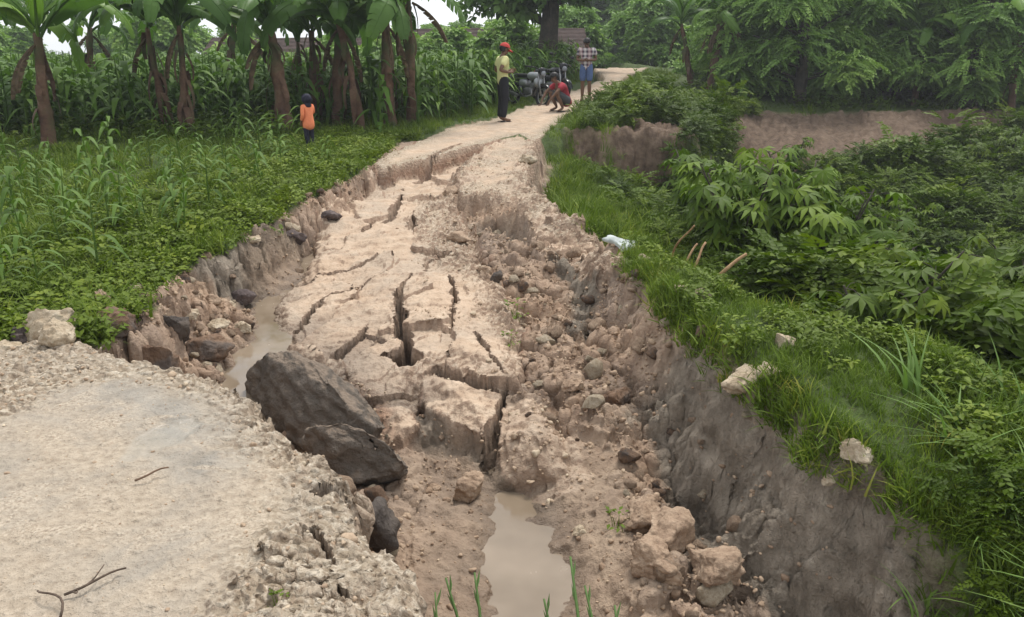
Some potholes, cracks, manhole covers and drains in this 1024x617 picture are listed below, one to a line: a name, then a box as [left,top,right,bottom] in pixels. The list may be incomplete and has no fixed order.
crack [296,254,459,367]
crack [432,332,510,475]
crack [361,144,460,232]
